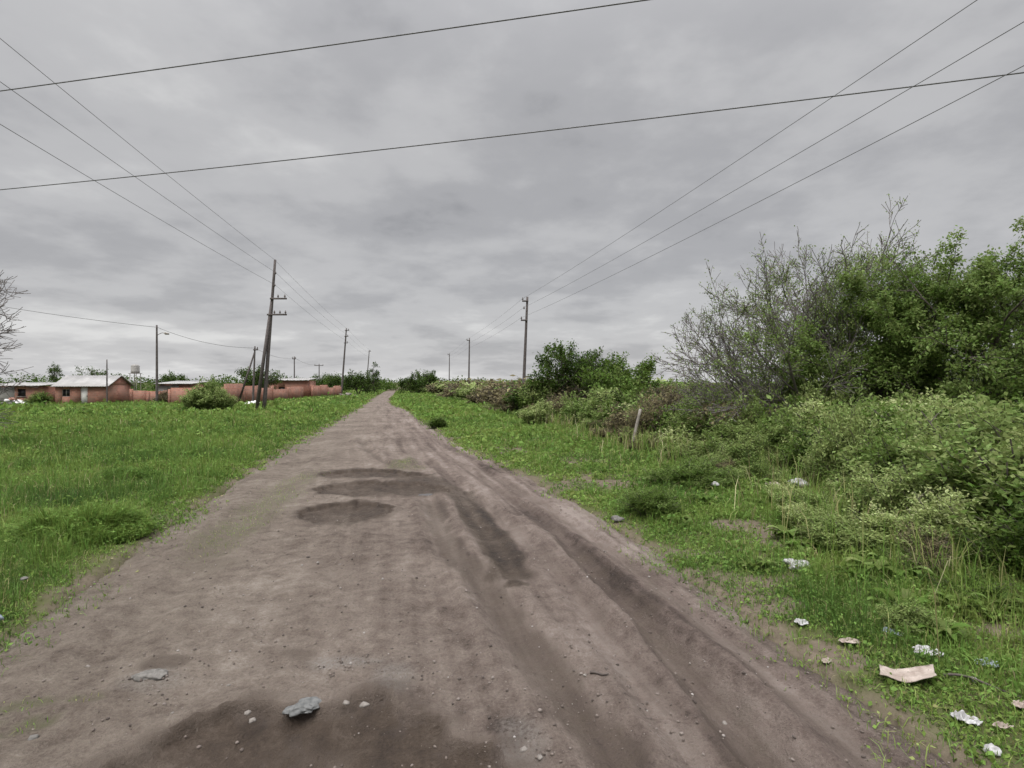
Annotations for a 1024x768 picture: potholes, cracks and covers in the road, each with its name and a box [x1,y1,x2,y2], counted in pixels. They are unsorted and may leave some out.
pothole [319,468,434,478]
pothole [101,686,509,768]
pothole [312,480,452,497]
pothole [296,500,396,525]
